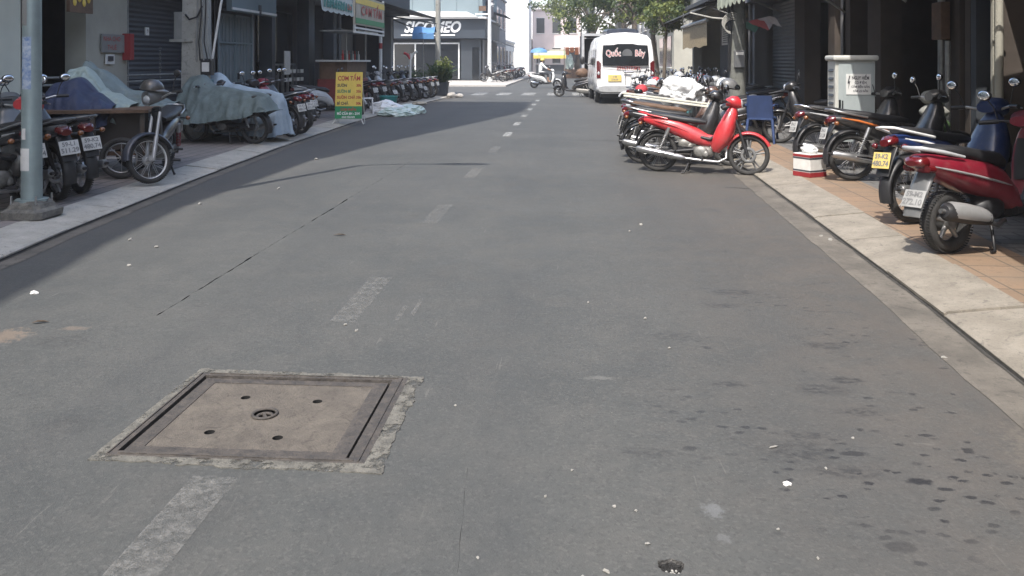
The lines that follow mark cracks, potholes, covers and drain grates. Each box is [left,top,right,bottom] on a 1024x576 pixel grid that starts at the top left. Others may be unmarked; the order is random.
pothole [643,549,699,576]
manhole cover [87,368,424,475]
